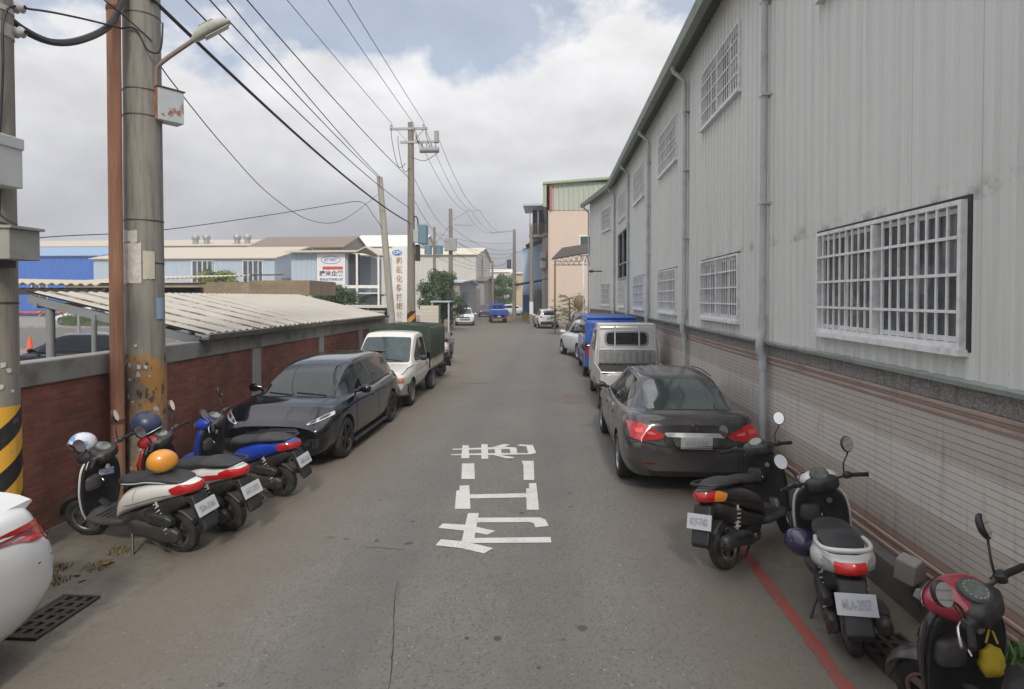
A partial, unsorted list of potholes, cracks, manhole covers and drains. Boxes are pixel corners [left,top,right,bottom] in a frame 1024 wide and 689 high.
drain grate [864,633,912,683]
drain grate [4,594,101,641]
crack [388,580,398,689]
